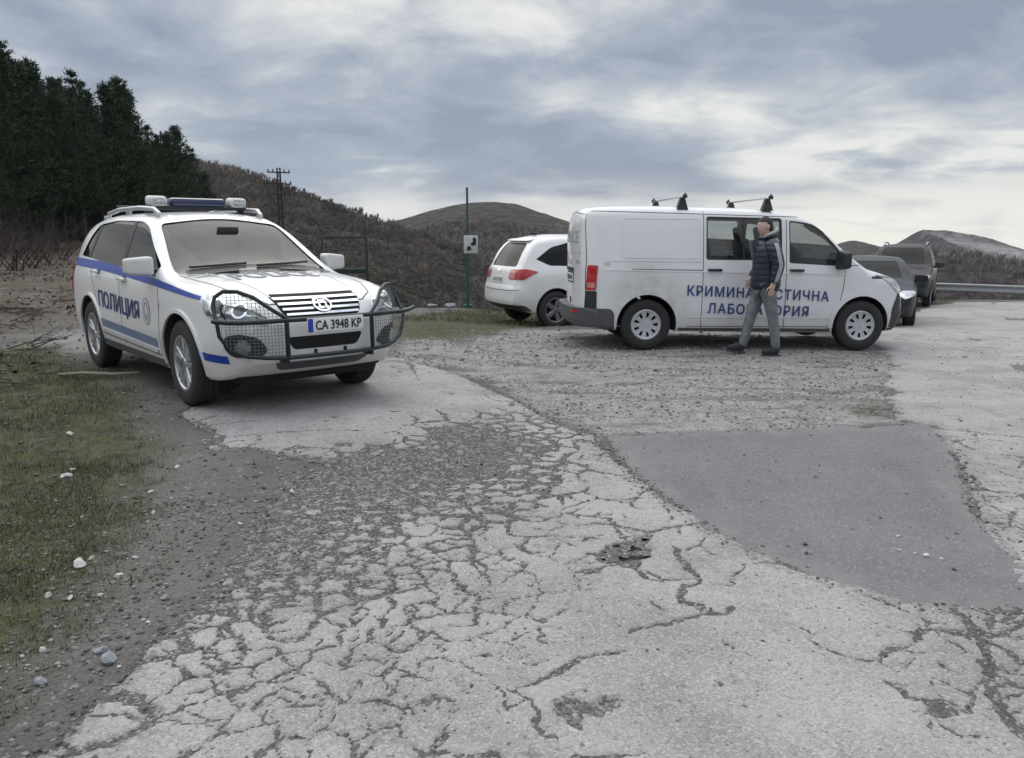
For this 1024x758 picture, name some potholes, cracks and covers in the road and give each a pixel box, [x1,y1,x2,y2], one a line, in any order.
pothole [601,538,652,569]
crack [804,372,1024,740]
crack [42,363,932,758]
pothole [552,696,620,730]
